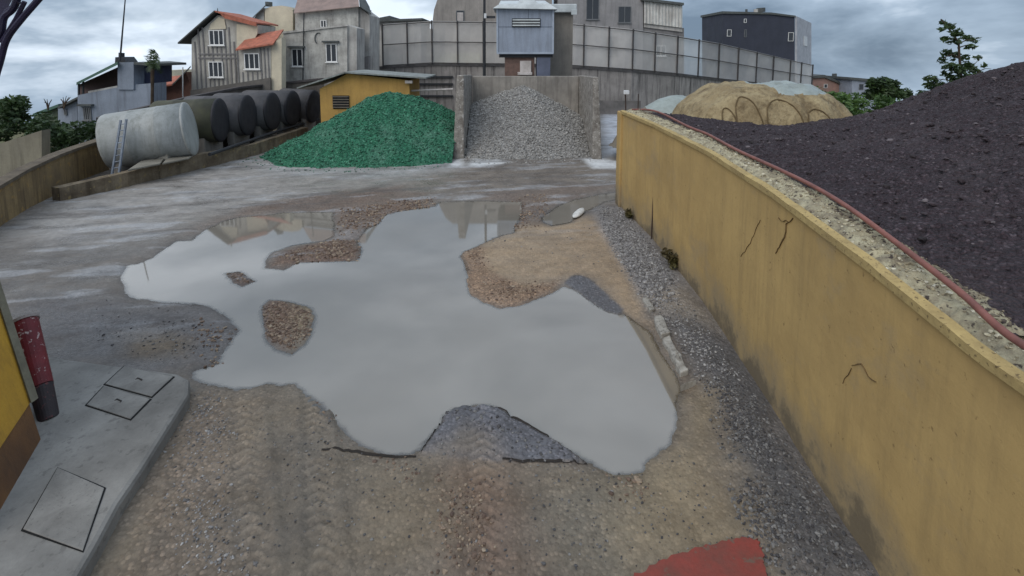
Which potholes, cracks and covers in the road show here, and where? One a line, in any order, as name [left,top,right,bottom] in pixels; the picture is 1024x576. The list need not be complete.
manhole cover [21,467,106,552]
pothole [512,190,616,229]
manhole cover [103,366,175,398]
pothole [109,198,692,485]
manhole cover [85,386,152,421]
